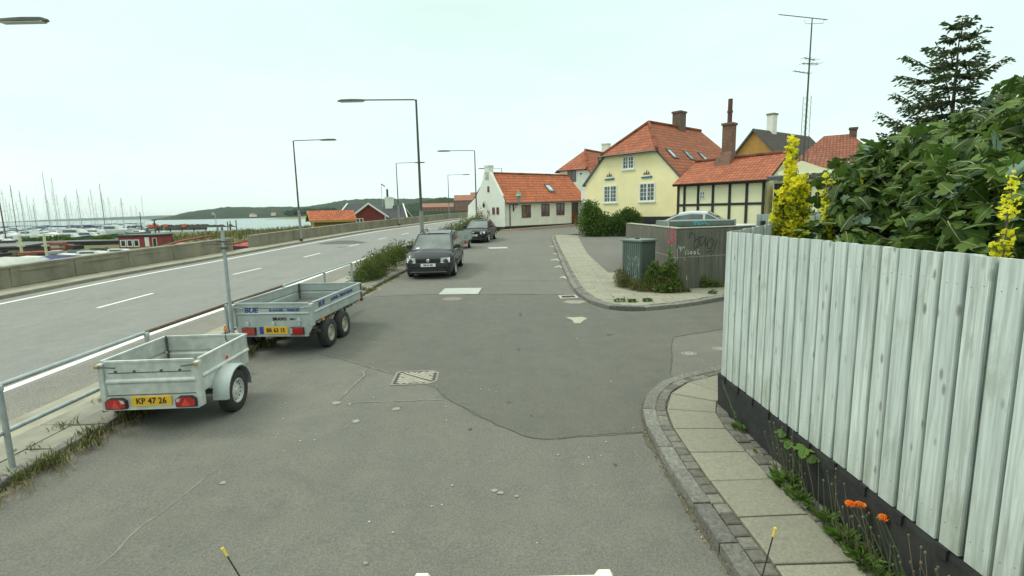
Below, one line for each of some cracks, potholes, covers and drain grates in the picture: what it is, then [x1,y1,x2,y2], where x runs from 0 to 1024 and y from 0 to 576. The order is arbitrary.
crack [95,464,224,569]
crack [339,368,447,403]
